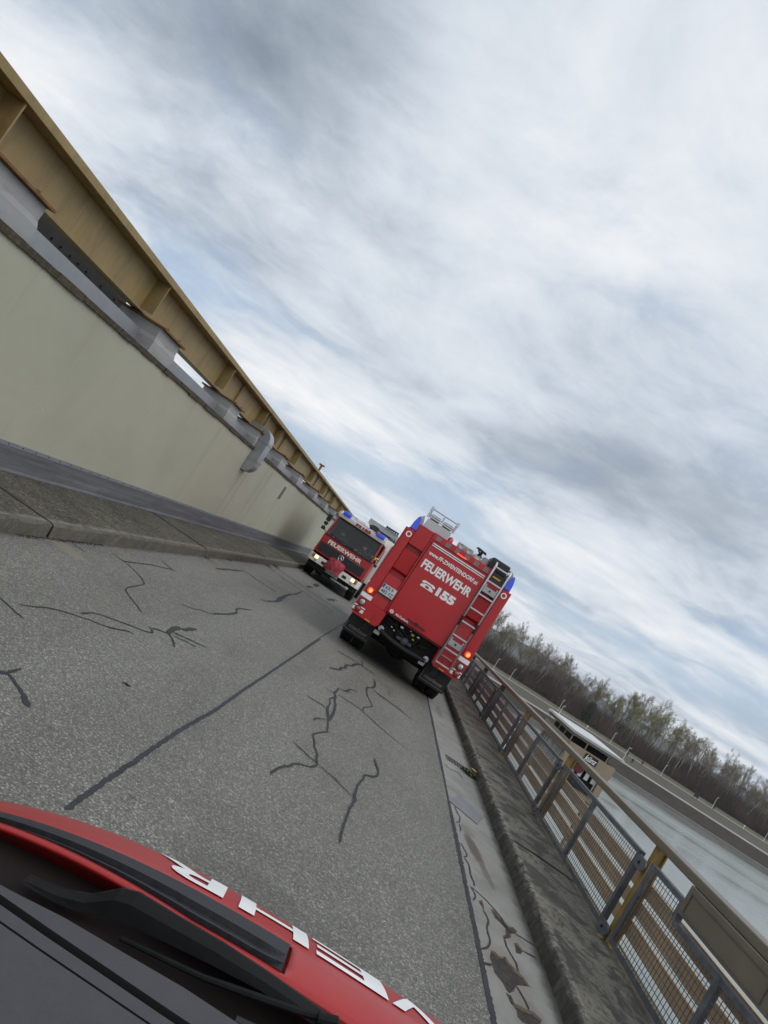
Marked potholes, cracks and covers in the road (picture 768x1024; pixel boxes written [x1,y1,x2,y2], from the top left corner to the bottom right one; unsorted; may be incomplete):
crack [455,795,535,1009]
crack [266,565,346,615]
crack [270,688,380,843]
